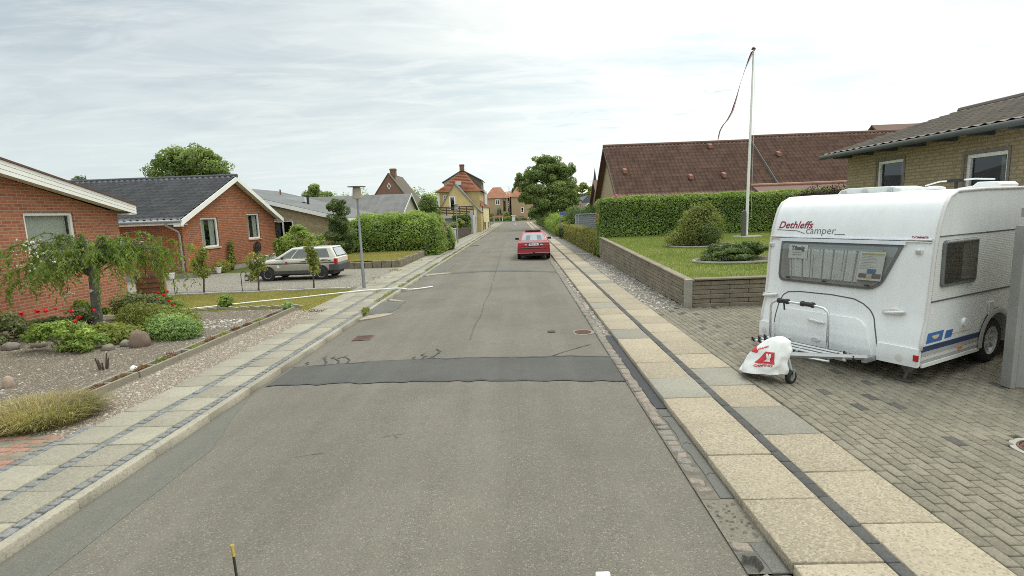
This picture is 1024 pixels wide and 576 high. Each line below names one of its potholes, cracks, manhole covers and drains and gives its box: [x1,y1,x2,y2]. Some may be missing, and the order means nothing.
manhole cover [1009,438,1024,454]
